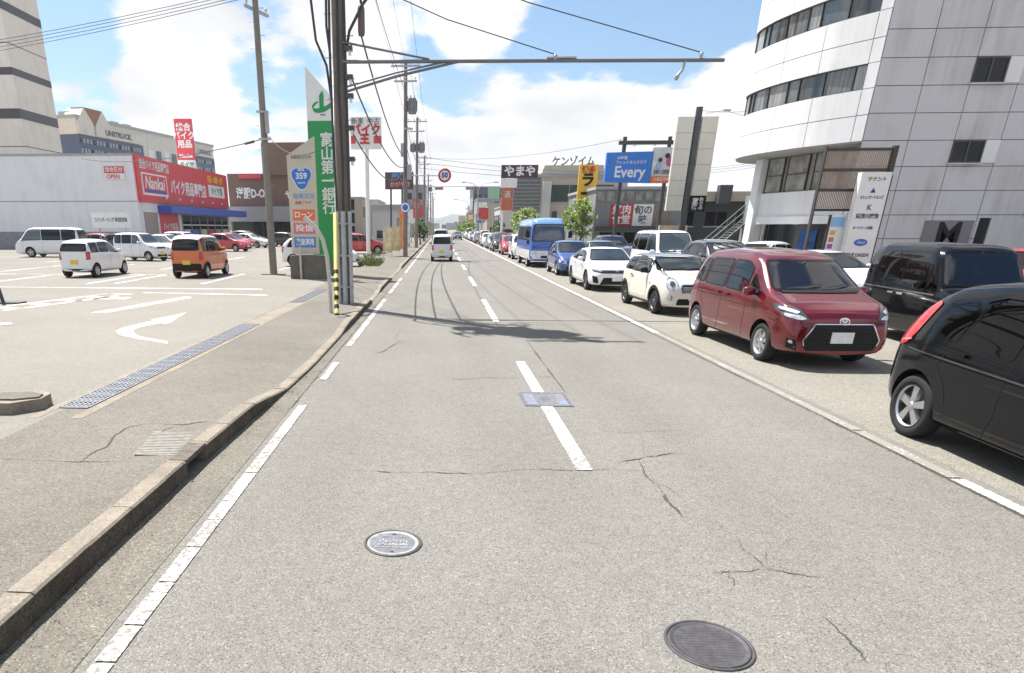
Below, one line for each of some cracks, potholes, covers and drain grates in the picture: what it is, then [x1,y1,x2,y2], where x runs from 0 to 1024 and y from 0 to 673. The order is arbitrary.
manhole cover [364,530,422,557]
crack [621,438,816,584]
crack [822,616,864,658]
drain grate [59,323,259,408]
manhole cover [664,620,756,672]
crack [81,421,205,462]
utility cover [519,392,574,407]
crack [291,465,603,474]
